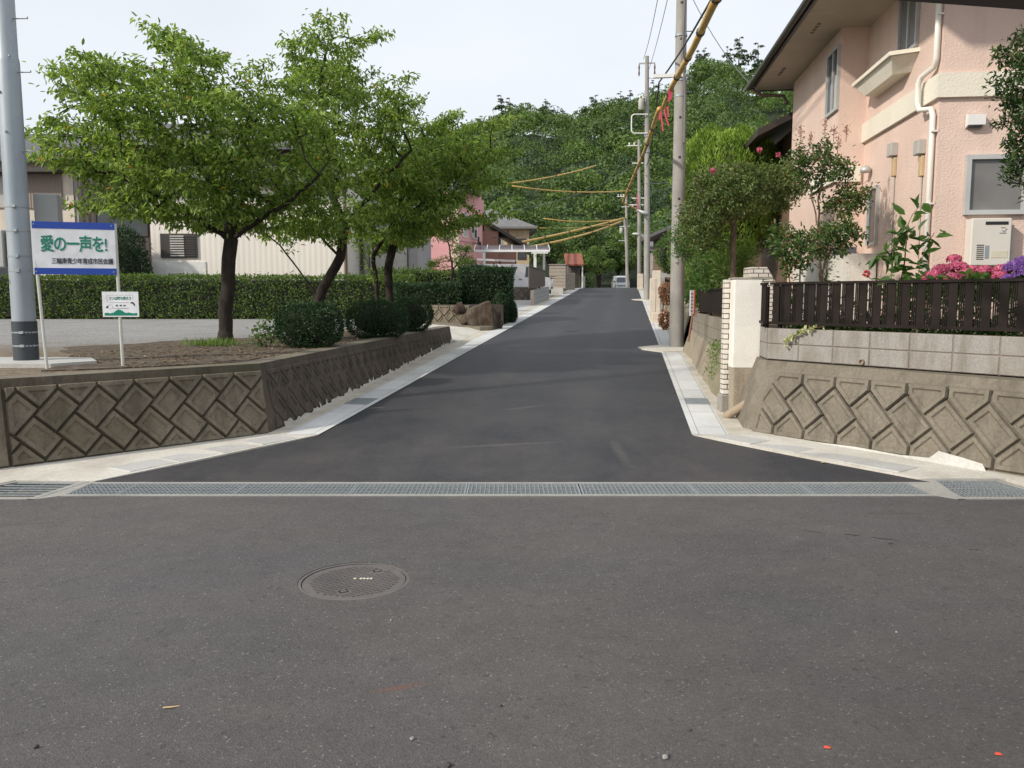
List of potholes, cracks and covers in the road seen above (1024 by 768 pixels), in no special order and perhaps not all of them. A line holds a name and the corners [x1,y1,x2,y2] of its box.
drain grate [579,484,698,494]
drain grate [689,484,813,494]
drain grate [466,484,581,494]
drain grate [937,481,1024,497]
drain grate [119,484,247,494]
drain grate [799,484,929,494]
drain grate [235,484,358,494]
drain grate [68,484,137,494]
manhole cover [297,563,410,600]
drain grate [350,484,468,494]
drain grate [0,483,75,496]
